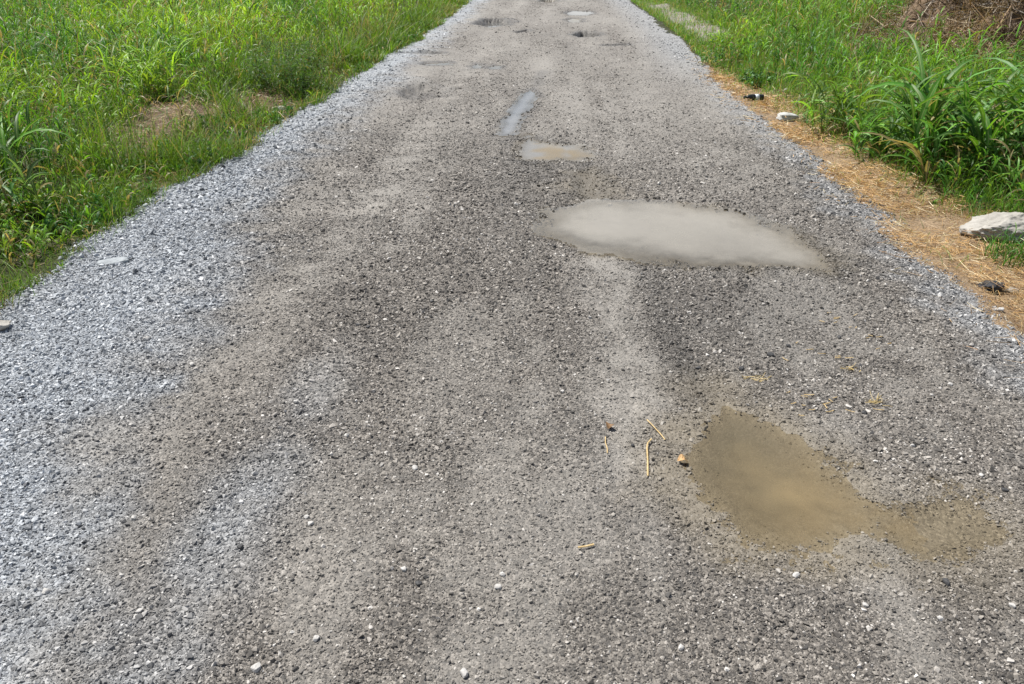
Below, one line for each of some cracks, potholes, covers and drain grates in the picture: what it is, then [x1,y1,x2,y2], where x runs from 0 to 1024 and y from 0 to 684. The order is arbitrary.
pothole [533,201,854,277]
